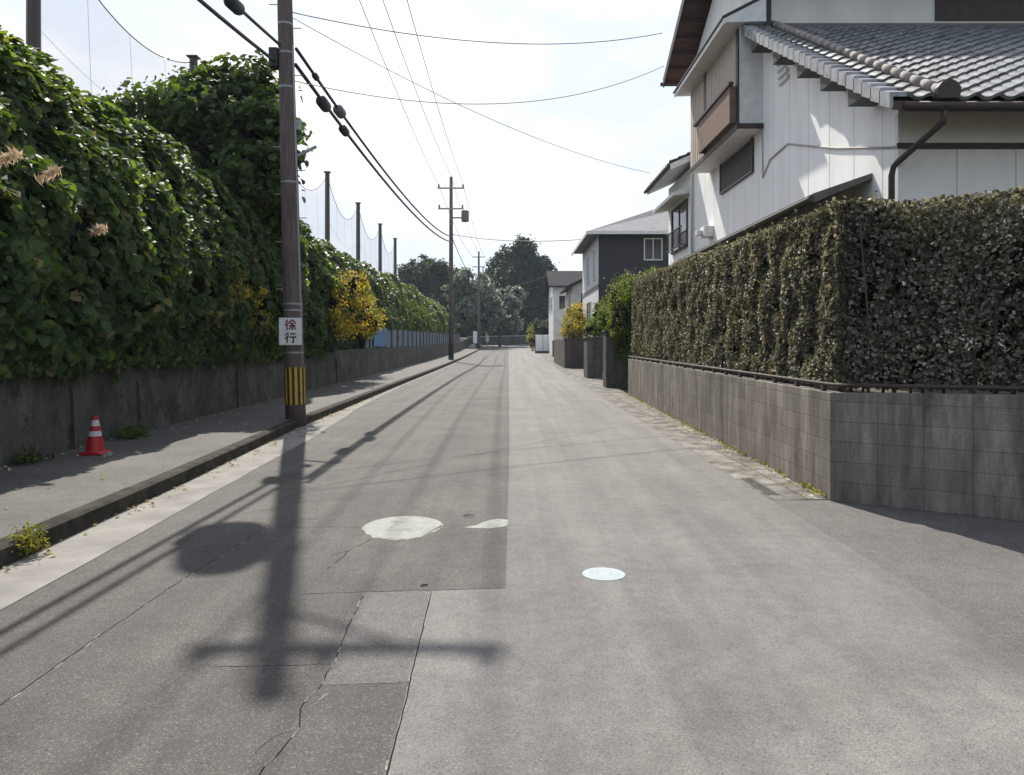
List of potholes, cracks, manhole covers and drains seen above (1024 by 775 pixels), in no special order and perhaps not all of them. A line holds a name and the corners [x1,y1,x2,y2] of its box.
crack [0,525,511,706]
manhole cover [581,567,626,581]
crack [199,588,500,775]
drain grate [742,479,780,495]
